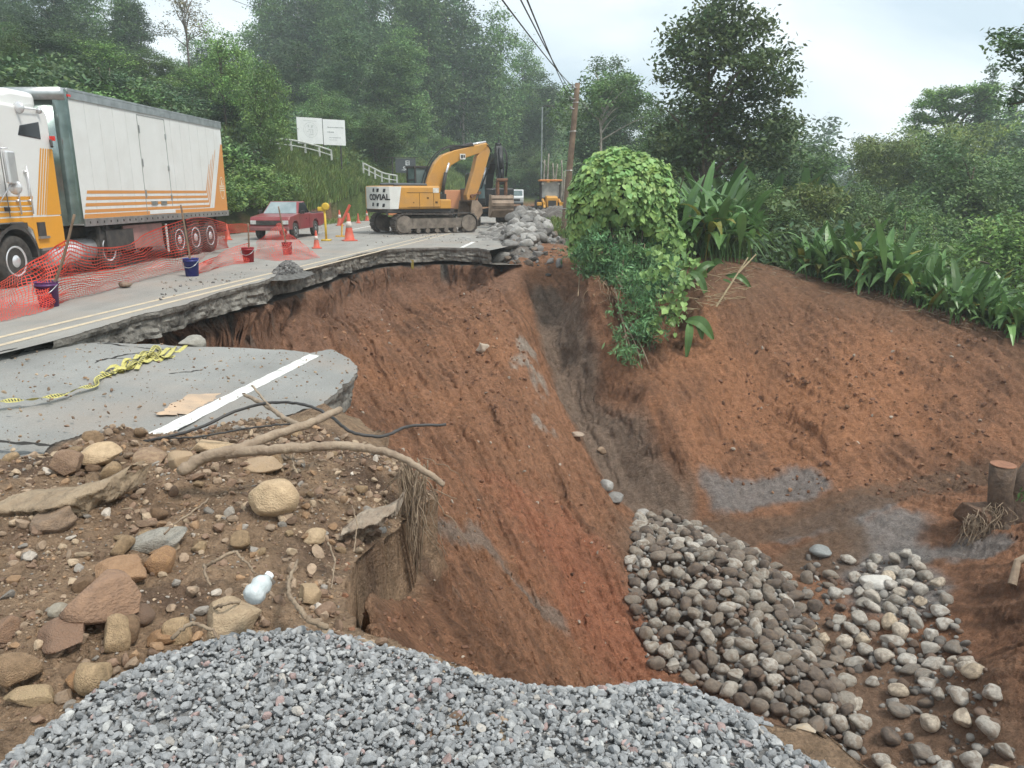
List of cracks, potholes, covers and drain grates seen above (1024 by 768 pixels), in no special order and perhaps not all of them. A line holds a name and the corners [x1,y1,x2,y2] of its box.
crack [95,343,164,363]
